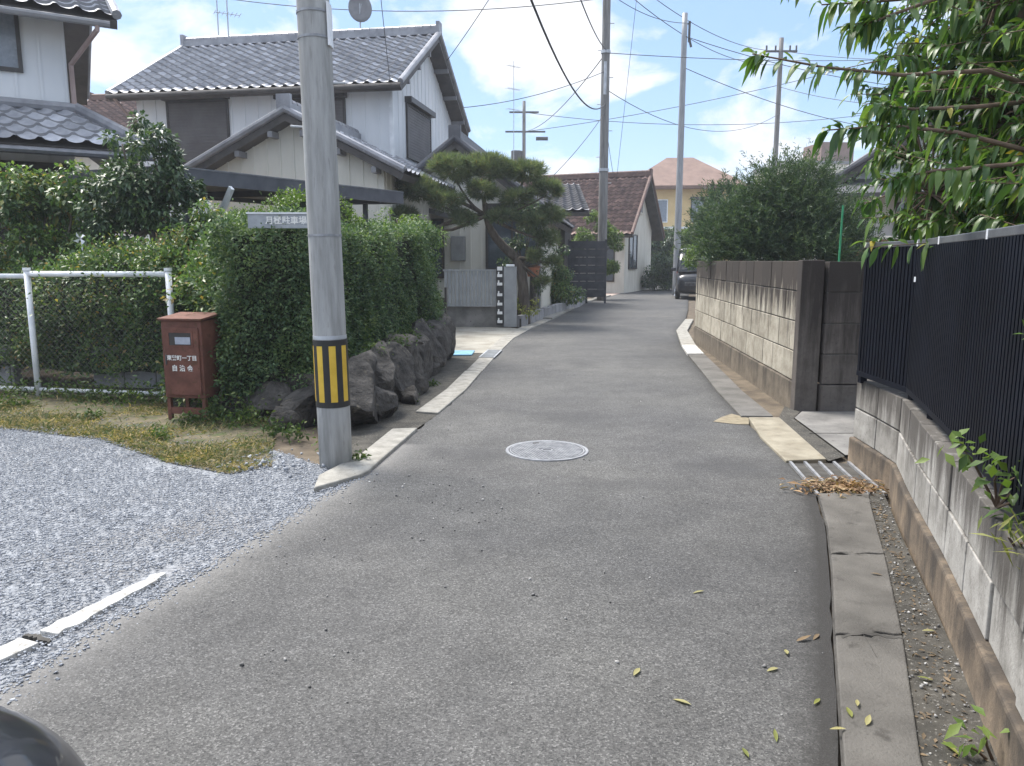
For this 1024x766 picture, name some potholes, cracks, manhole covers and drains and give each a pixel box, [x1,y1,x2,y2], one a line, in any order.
drain grate [788,461,888,499]
manhole cover [506,440,589,461]
drain grate [478,349,502,358]
